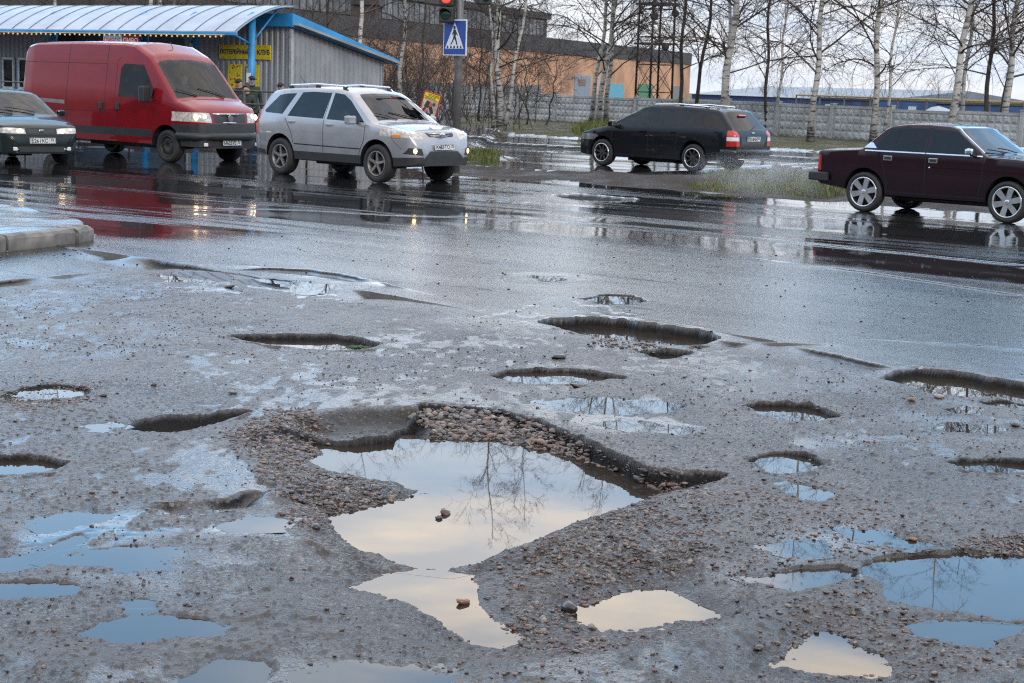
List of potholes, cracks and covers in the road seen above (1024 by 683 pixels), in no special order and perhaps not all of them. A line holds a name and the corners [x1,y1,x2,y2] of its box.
pothole [0,452,74,478]
pothole [119,408,256,435]
pothole [228,402,732,601]
pothole [488,367,632,387]
pothole [744,449,827,475]
pothole [741,399,846,422]
pothole [871,367,1024,404]
pothole [0,383,100,410]
pothole [537,316,728,348]
pothole [576,293,650,306]
pothole [343,568,748,663]
pothole [225,333,384,352]
